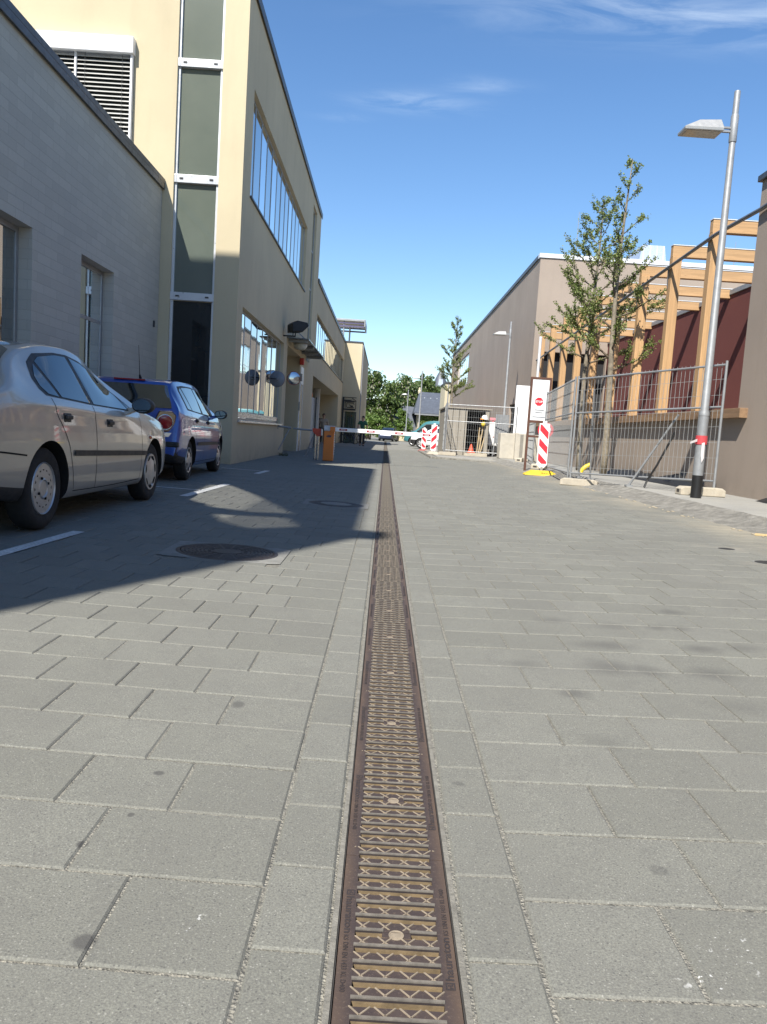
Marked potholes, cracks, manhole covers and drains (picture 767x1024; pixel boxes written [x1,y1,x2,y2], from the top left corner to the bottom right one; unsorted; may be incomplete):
drain grate [376,529,399,538]
drain grate [374,545,402,556]
drain grate [365,622,415,655]
drain grate [372,567,405,583]
drain grate [375,536,400,546]
manhole cover [302,499,369,509]
manhole cover [156,541,291,564]
drain grate [370,581,408,601]
drain grate [373,555,403,568]
drain grate [331,855,464,1024]
drain grate [368,599,411,624]
drain grate [356,694,429,760]
